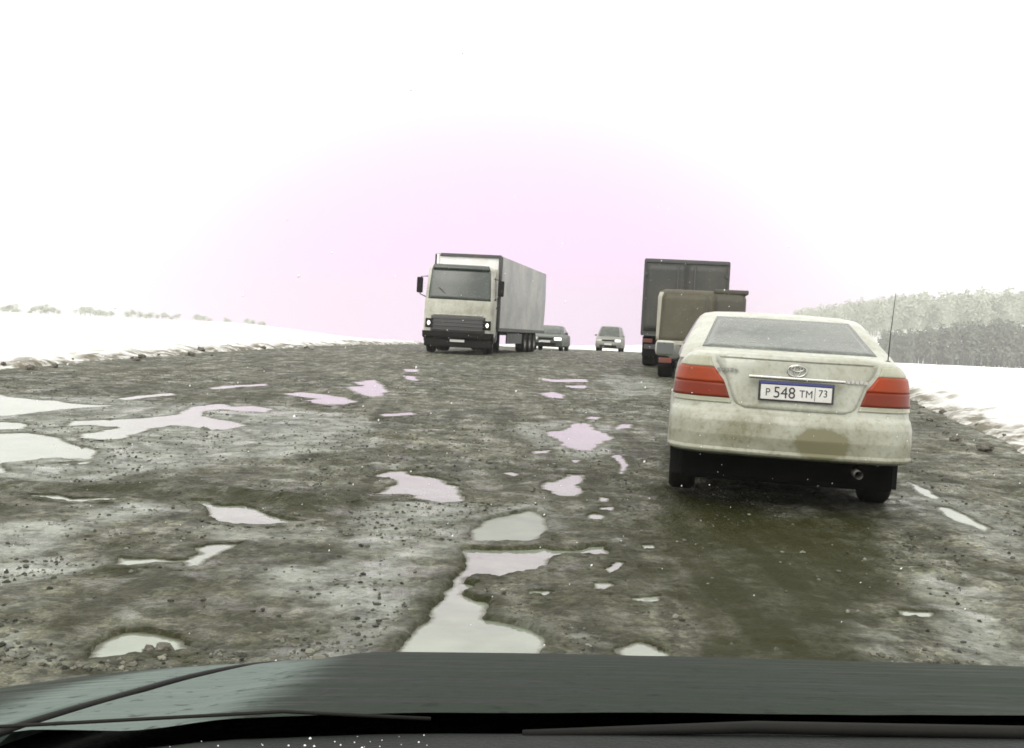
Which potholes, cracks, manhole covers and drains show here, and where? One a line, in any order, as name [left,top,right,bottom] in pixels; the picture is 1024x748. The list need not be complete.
pothole [366,540,627,654]
pothole [0,420,114,476]
pothole [591,633,696,657]
pothole [0,392,129,417]
pothole [55,622,215,667]
pothole [530,471,596,498]
pothole [96,539,259,571]
pothole [339,379,398,398]
pothole [452,505,564,544]
pothole [367,468,477,505]
pothole [535,422,621,452]
